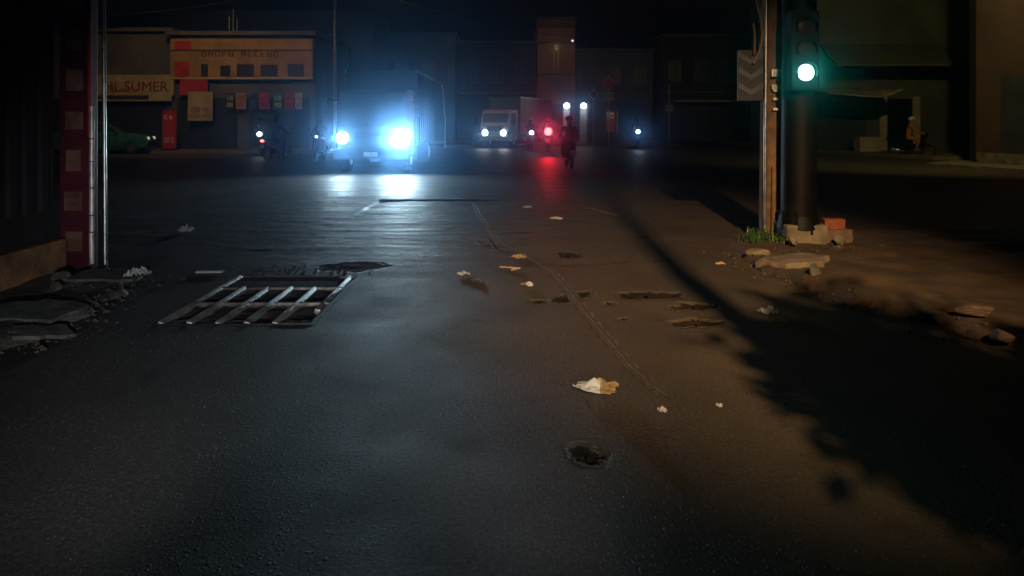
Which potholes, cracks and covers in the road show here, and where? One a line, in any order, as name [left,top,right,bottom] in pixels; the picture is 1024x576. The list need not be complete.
pothole [565,442,610,468]
pothole [548,291,595,303]
pothole [666,302,718,312]
pothole [666,318,728,328]
pothole [615,291,684,301]
drain grate [143,275,362,326]
crack [474,232,671,266]
pothole [318,262,390,272]
